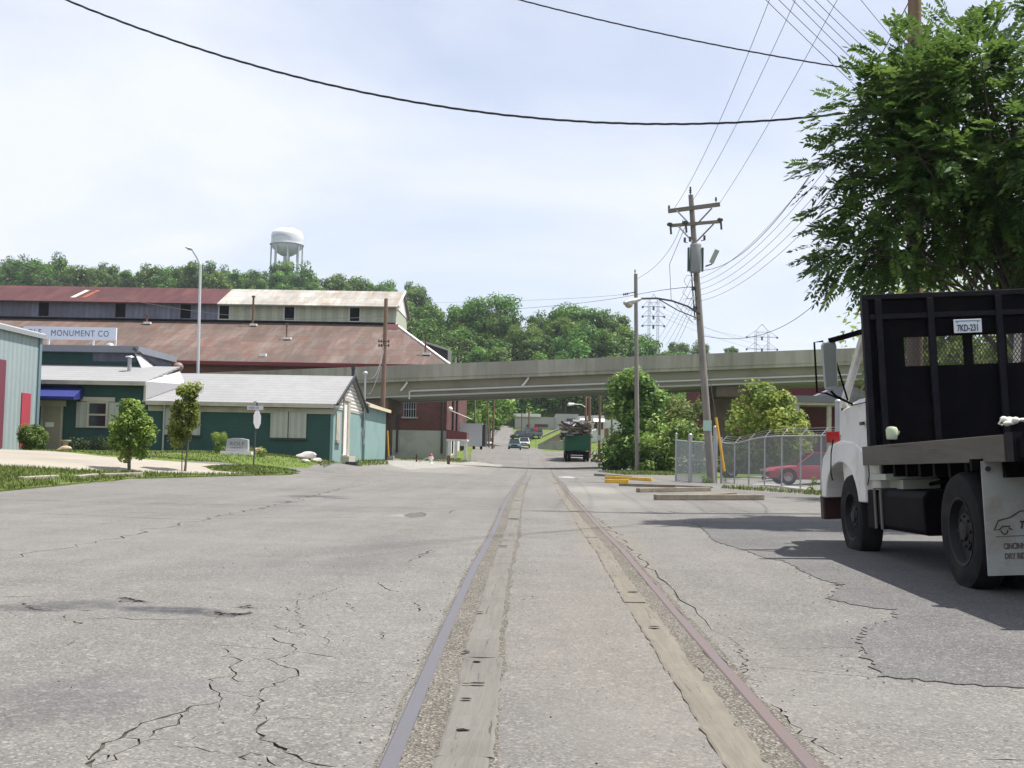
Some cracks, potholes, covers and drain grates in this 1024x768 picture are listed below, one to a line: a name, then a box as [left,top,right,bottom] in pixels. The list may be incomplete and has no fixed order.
crack [85,587,392,768]
crack [597,518,871,753]
